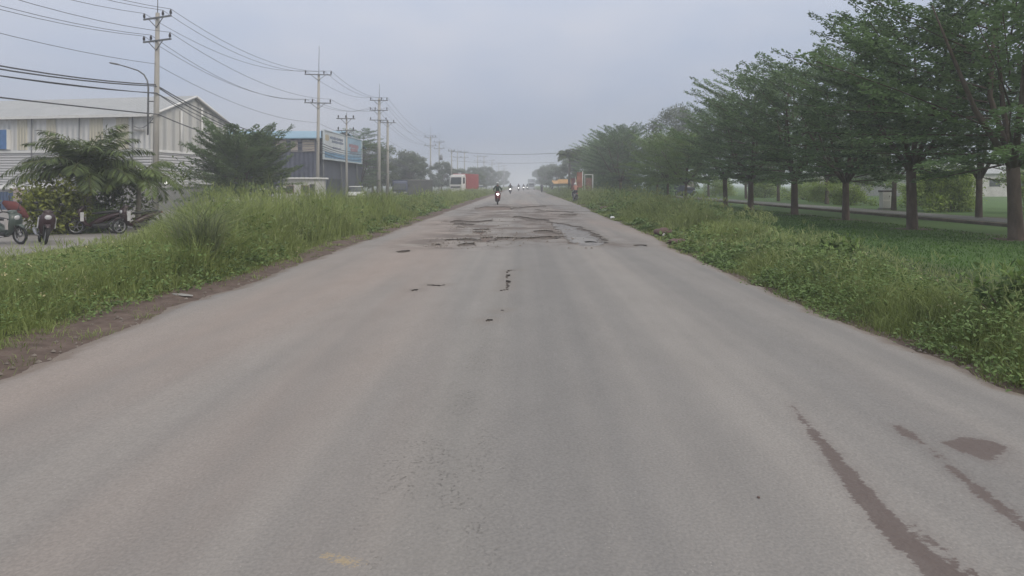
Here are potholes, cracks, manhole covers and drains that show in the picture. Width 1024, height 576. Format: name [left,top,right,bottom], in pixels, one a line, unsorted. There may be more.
pothole [548,222,609,246]
